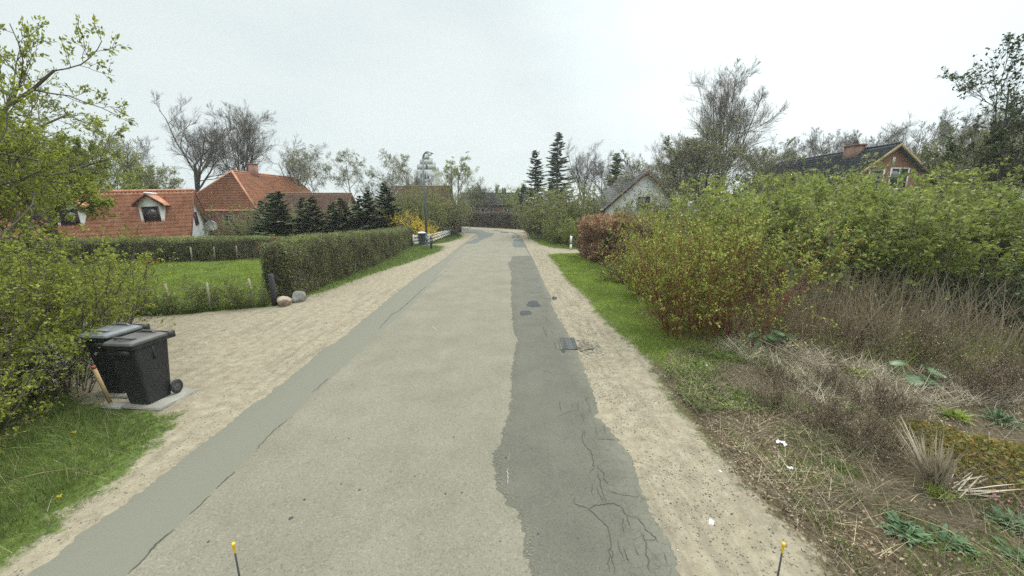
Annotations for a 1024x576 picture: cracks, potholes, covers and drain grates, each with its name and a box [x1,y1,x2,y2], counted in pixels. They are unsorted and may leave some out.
crack [559,399,667,572]
